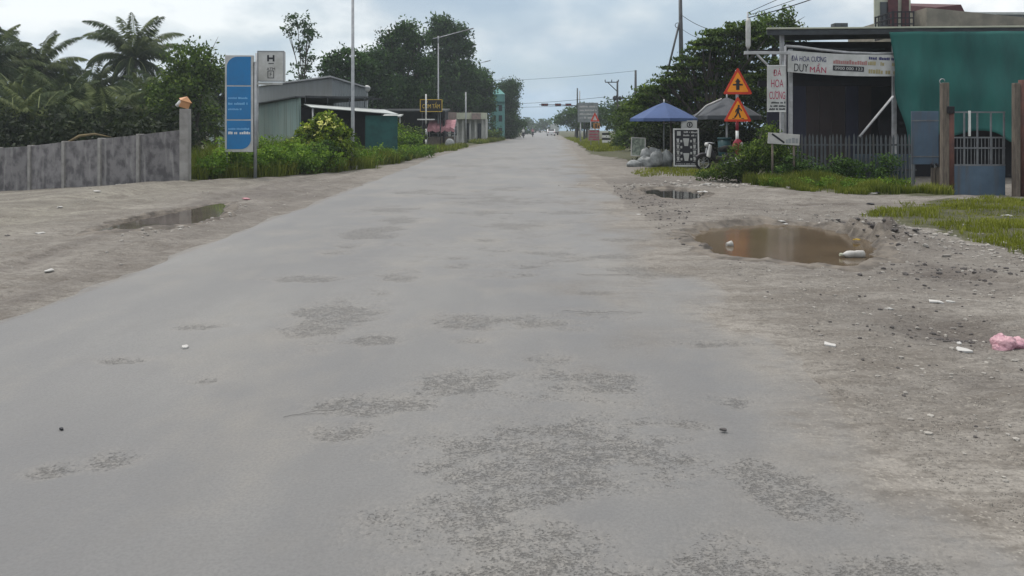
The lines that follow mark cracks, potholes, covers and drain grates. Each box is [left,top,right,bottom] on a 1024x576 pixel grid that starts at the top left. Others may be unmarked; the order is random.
pothole [76,201,239,237]
pothole [666,215,905,272]
pothole [634,186,715,200]
